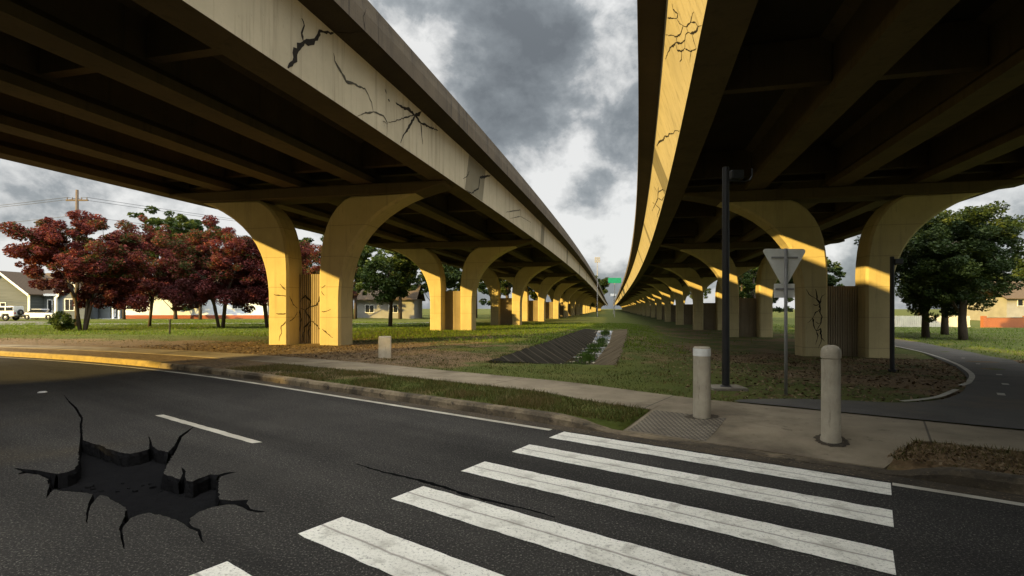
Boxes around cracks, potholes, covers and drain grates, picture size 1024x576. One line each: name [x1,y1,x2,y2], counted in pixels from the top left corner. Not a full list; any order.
crack [358,464,555,518]
pothole [15,395,264,548]
